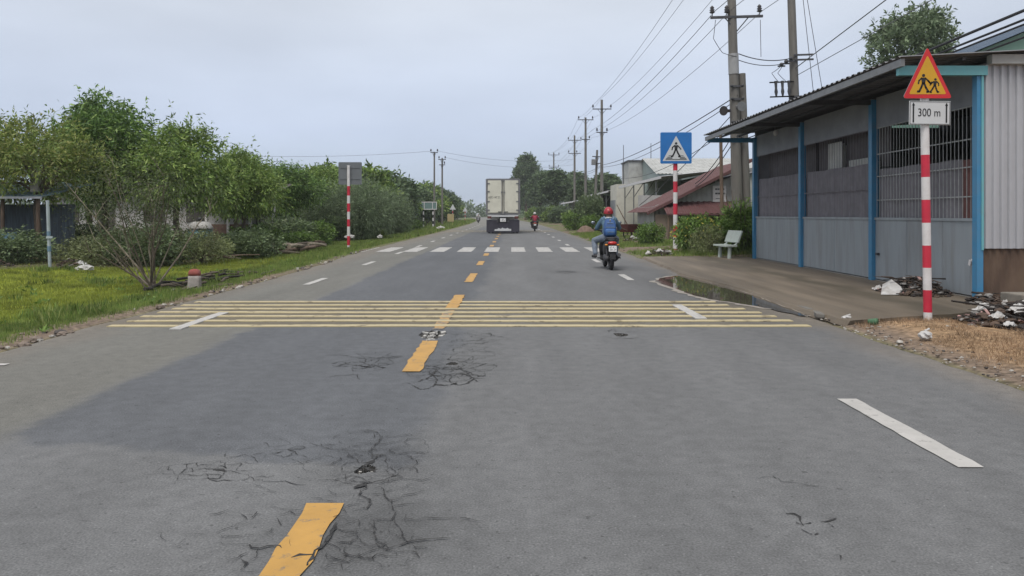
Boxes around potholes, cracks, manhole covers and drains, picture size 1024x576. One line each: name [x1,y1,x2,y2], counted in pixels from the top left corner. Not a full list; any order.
pothole [409,329,458,341]
crack [160,429,477,572]
crack [786,513,842,559]
crack [326,352,401,377]
crack [402,332,510,389]
